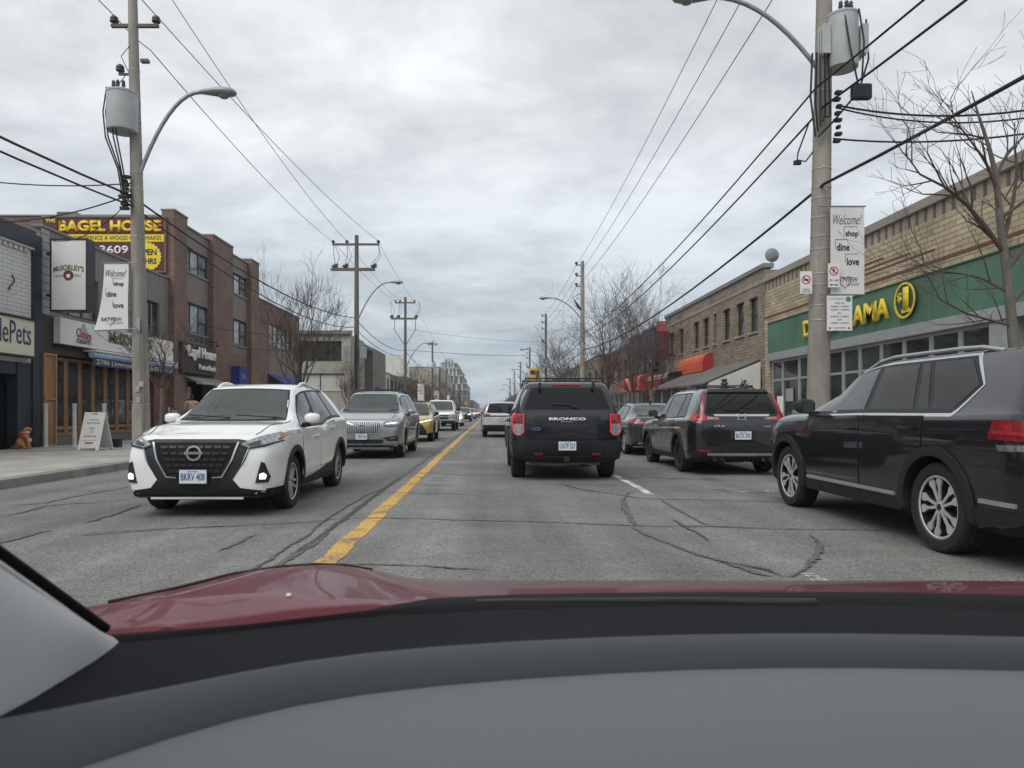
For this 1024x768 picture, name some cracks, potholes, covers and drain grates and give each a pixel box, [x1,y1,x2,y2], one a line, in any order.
crack [0,483,889,576]
